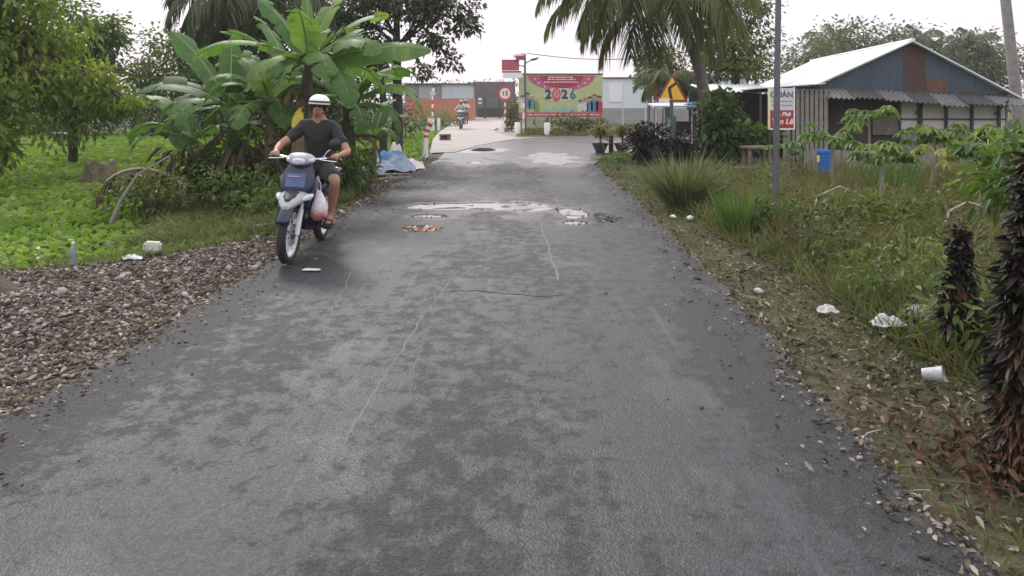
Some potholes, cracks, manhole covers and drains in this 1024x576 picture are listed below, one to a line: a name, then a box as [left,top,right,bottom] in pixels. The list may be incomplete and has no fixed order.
pothole [593,212,621,223]
pothole [403,224,443,232]
crack [320,215,561,449]
